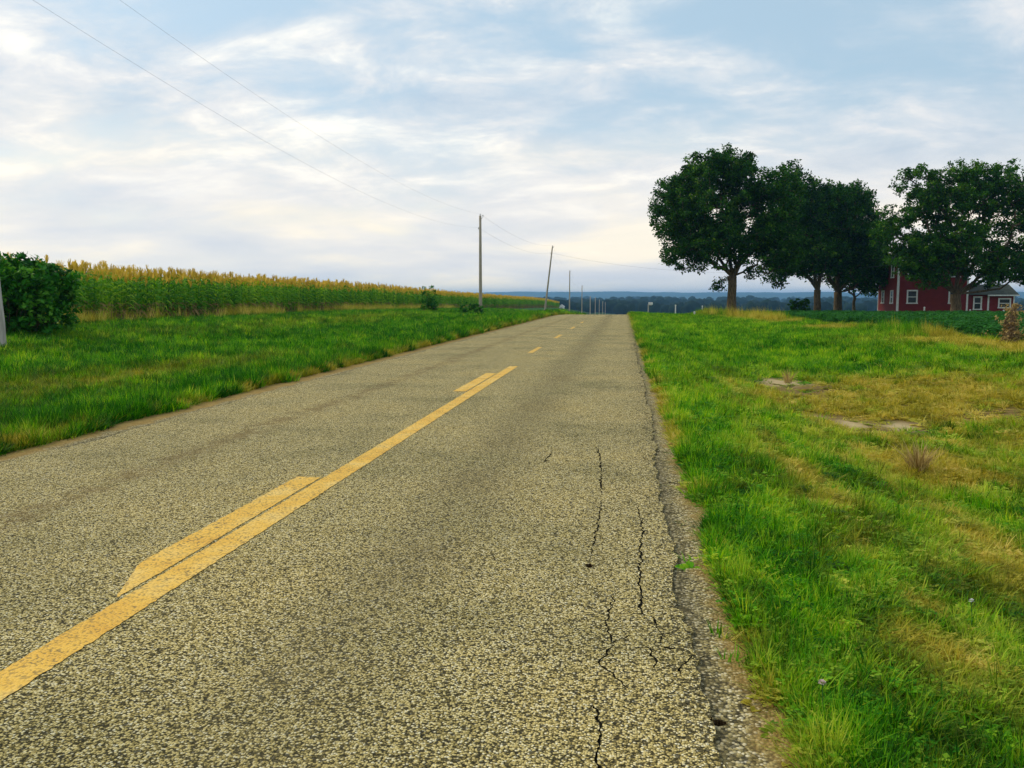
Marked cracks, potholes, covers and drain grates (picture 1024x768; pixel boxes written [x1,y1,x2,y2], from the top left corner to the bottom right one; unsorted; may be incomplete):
crack [589,447,603,564]
crack [586,706,603,768]
crack [583,506,704,696]
